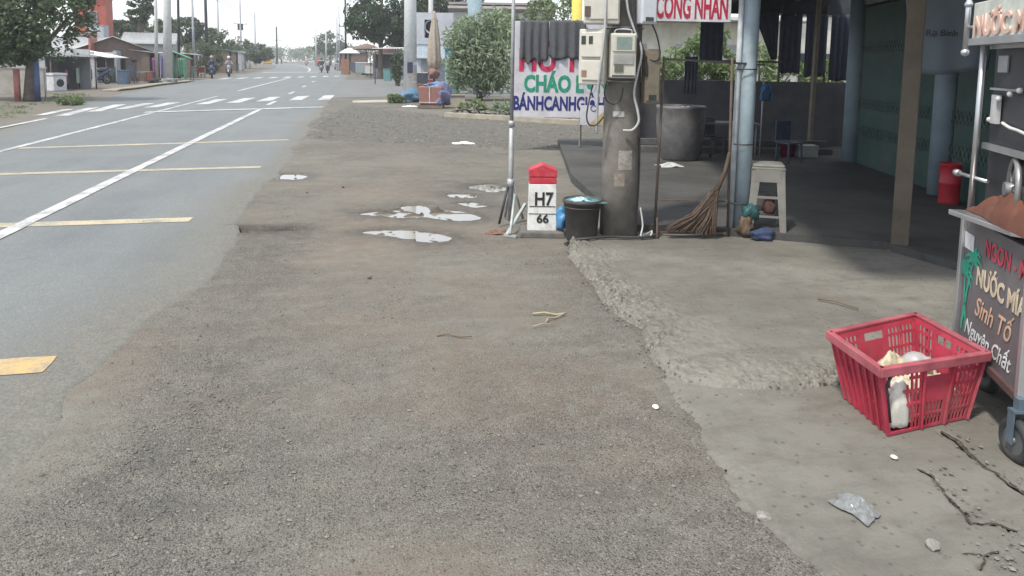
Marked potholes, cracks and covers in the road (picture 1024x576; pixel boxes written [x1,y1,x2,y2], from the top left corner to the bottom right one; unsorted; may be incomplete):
crack [918,431,1024,533]
pothole [351,203,490,222]
crack [962,551,999,571]
pothole [353,227,462,245]
pothole [462,183,507,194]
